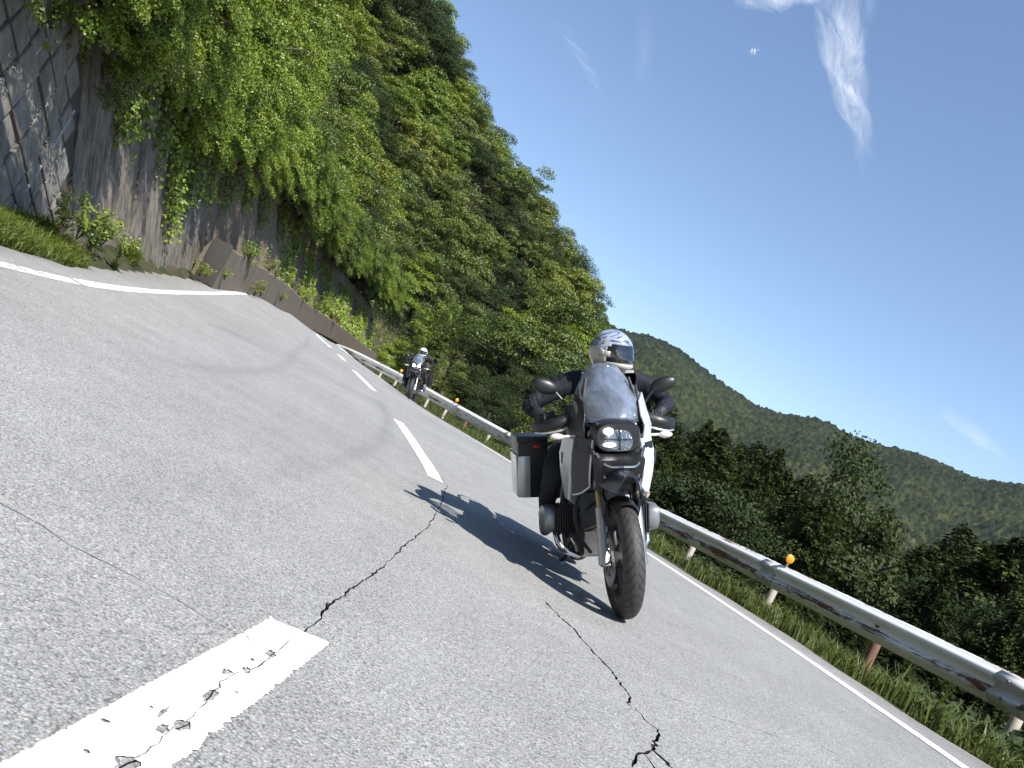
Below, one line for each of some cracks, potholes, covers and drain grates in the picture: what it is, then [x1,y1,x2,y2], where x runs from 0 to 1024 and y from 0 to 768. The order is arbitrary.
crack [0,503,234,632]
crack [545,601,672,768]
crack [119,476,448,768]
